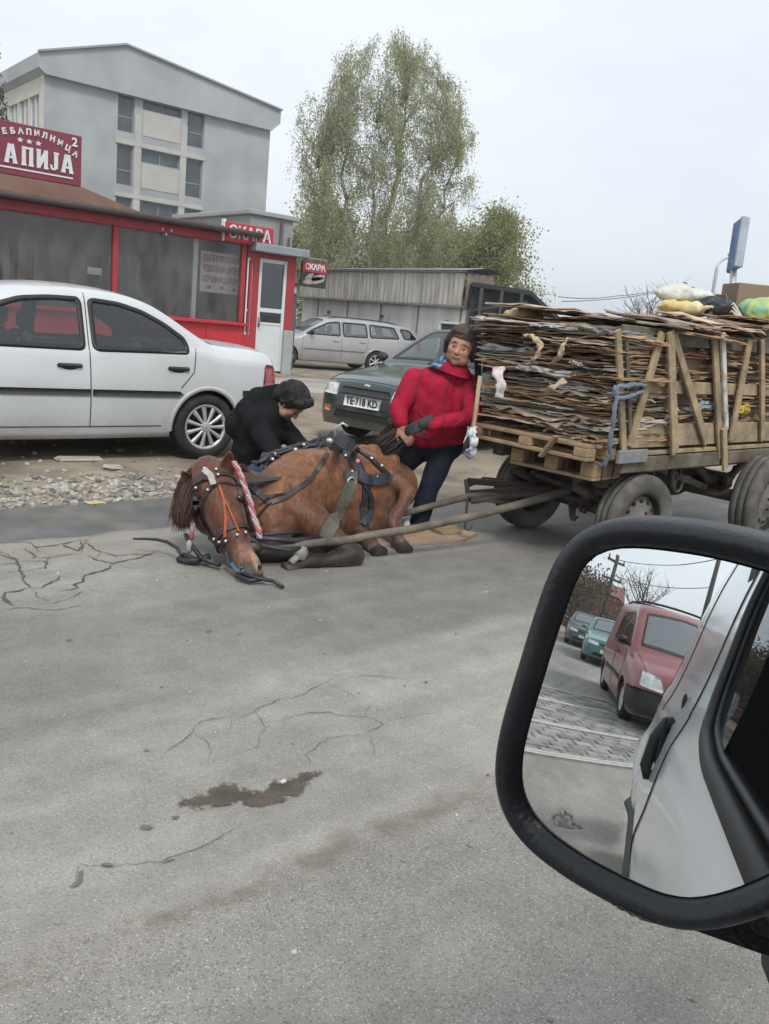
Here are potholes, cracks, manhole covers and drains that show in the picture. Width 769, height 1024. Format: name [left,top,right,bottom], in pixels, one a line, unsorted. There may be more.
crack [0,539,156,611]
crack [75,825,240,879]
crack [171,677,434,768]
